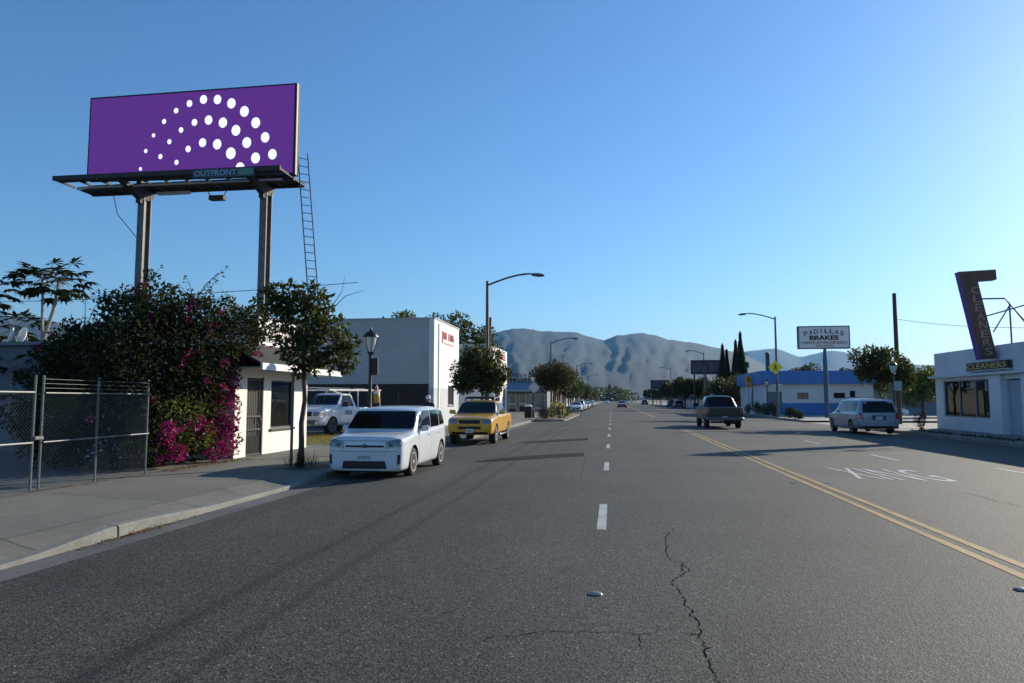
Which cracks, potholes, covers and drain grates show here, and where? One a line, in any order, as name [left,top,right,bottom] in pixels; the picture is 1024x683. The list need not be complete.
crack [454,529,720,683]
